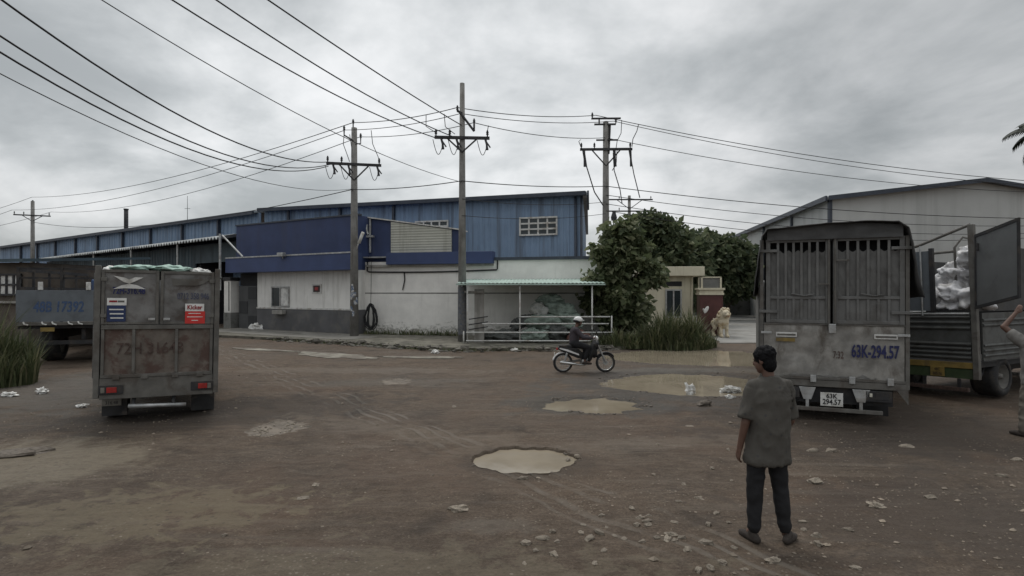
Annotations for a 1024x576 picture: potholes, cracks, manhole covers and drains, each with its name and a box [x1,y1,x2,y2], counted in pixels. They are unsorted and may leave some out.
pothole [532,395,653,415]
pothole [587,371,756,398]
pothole [244,419,312,437]
pothole [470,446,581,476]
